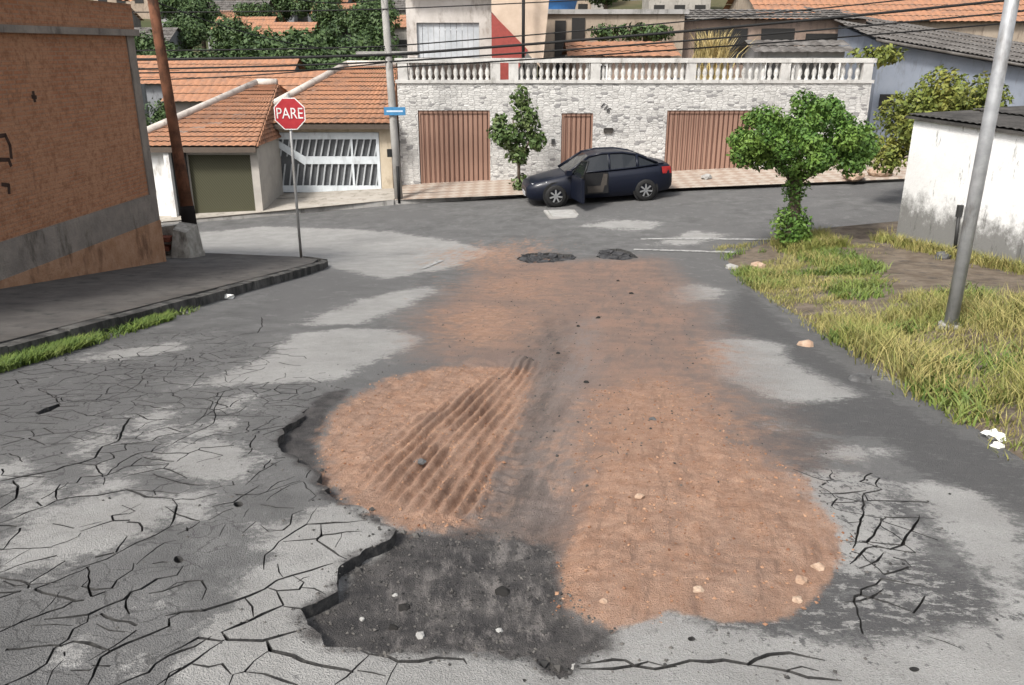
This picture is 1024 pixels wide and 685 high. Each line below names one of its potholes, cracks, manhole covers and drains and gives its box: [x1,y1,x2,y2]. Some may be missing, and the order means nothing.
crack [0,333,962,685]
pothole [277,353,852,679]
